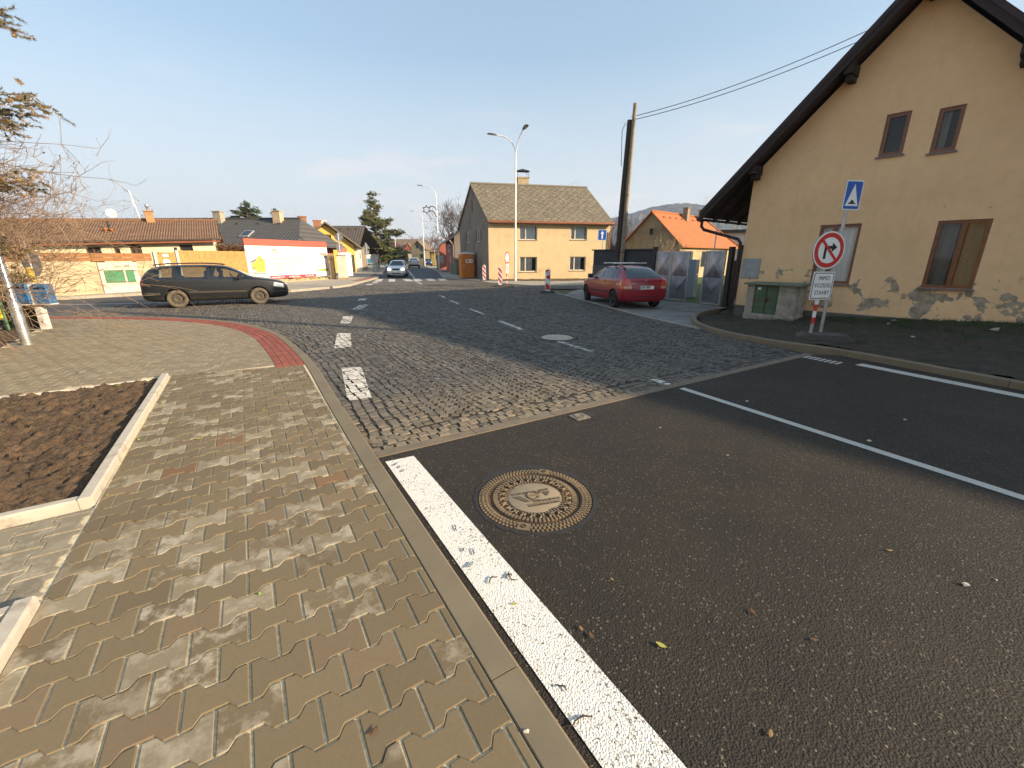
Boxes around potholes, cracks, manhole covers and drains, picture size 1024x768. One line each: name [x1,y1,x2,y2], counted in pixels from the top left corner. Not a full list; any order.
utility cover [569,412,596,421]
manhole cover [473,465,599,536]
manhole cover [536,334,579,342]
